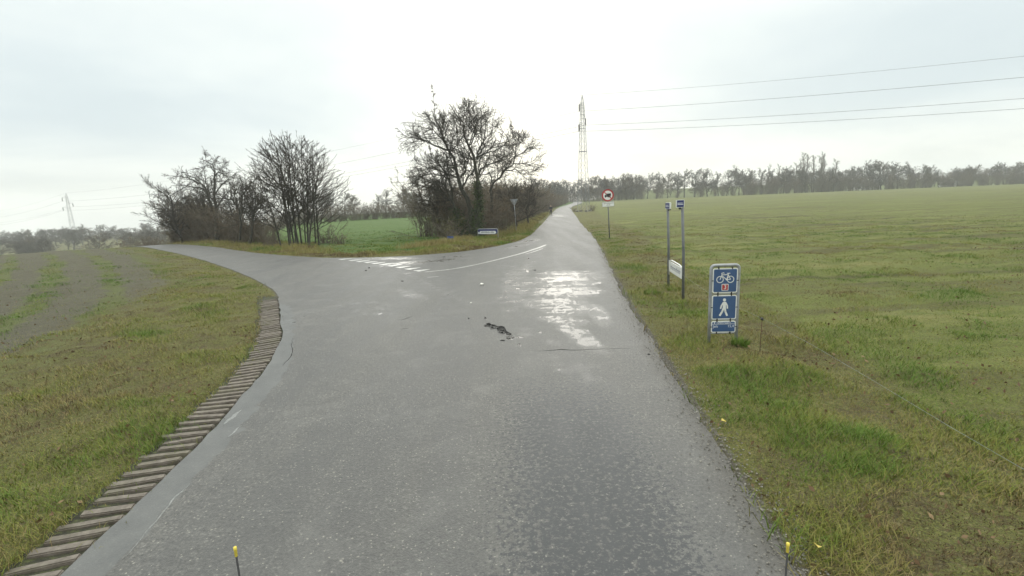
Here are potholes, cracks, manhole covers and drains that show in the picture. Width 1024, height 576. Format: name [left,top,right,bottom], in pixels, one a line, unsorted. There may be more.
pothole [485,323,511,335]
